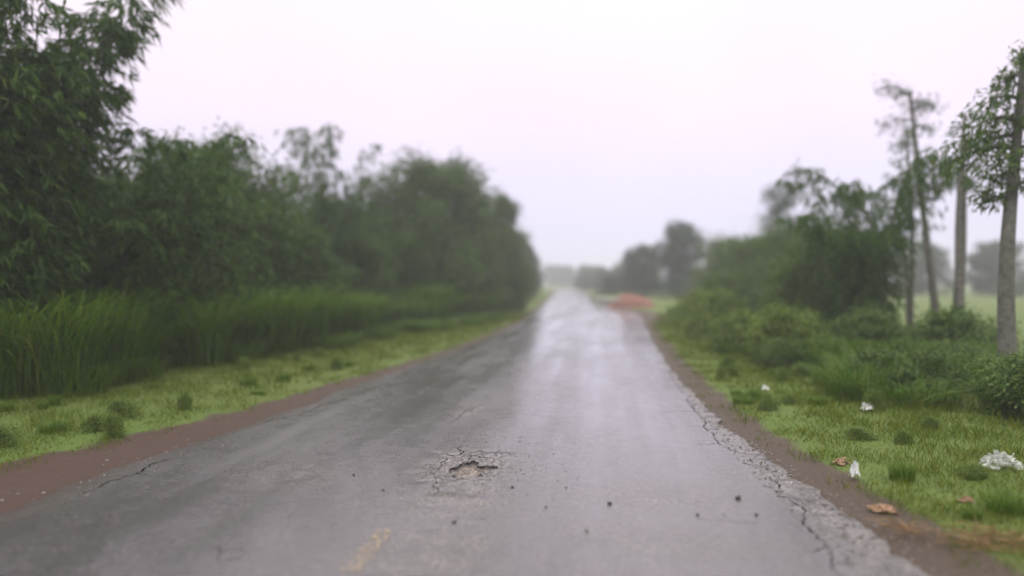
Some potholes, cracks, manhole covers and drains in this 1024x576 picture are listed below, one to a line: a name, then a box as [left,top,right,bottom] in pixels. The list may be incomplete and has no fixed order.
pothole [449,460,498,478]
crack [764,474,840,574]
